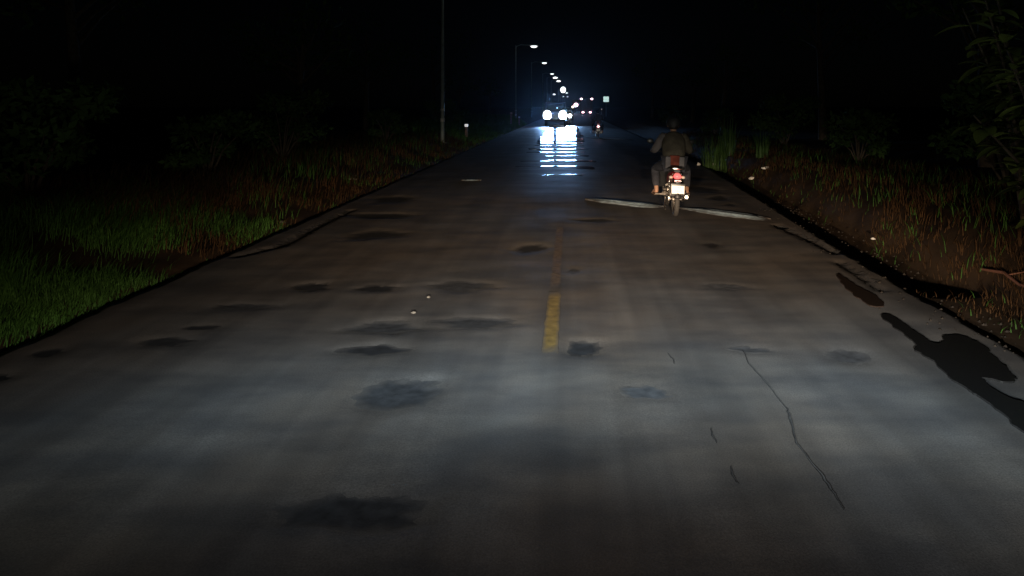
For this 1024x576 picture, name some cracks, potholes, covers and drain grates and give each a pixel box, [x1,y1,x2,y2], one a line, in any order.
pothole [619,385,673,400]
pothole [271,492,429,535]
pothole [430,317,519,330]
pothole [512,244,549,254]
pothole [350,378,445,412]
pothole [27,348,68,359]
pothole [826,349,872,365]
pothole [426,281,498,293]
pothole [333,344,413,356]
pothole [137,337,198,348]
pothole [567,340,603,357]
